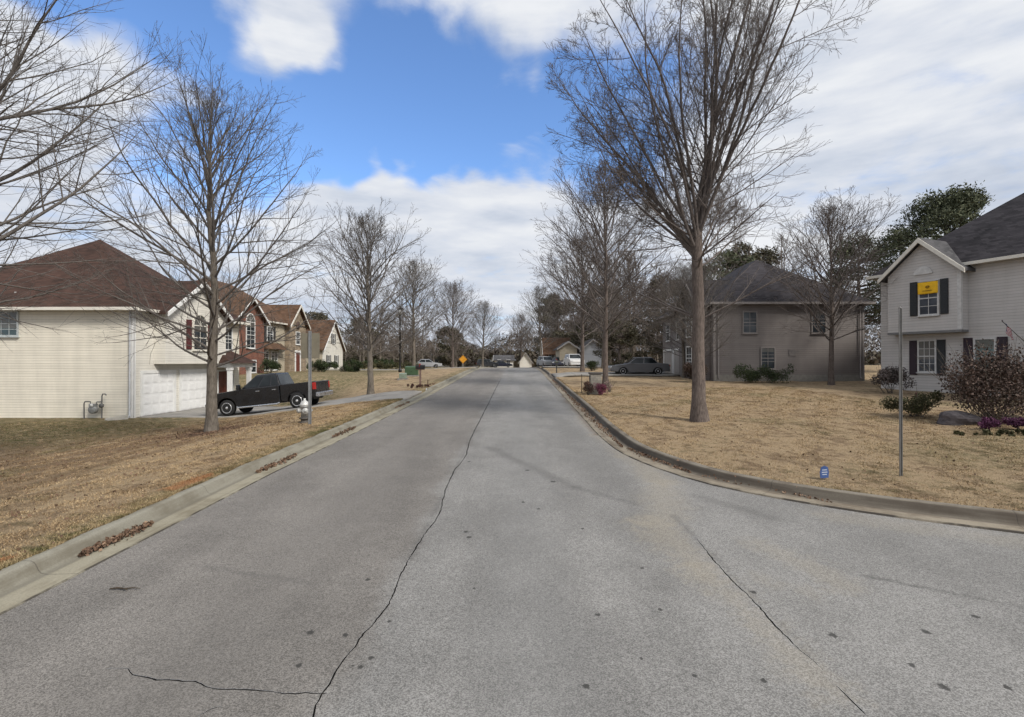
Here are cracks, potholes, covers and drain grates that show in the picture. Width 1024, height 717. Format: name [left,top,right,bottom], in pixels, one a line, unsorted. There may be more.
crack [106,377,502,717]
crack [696,538,865,714]
